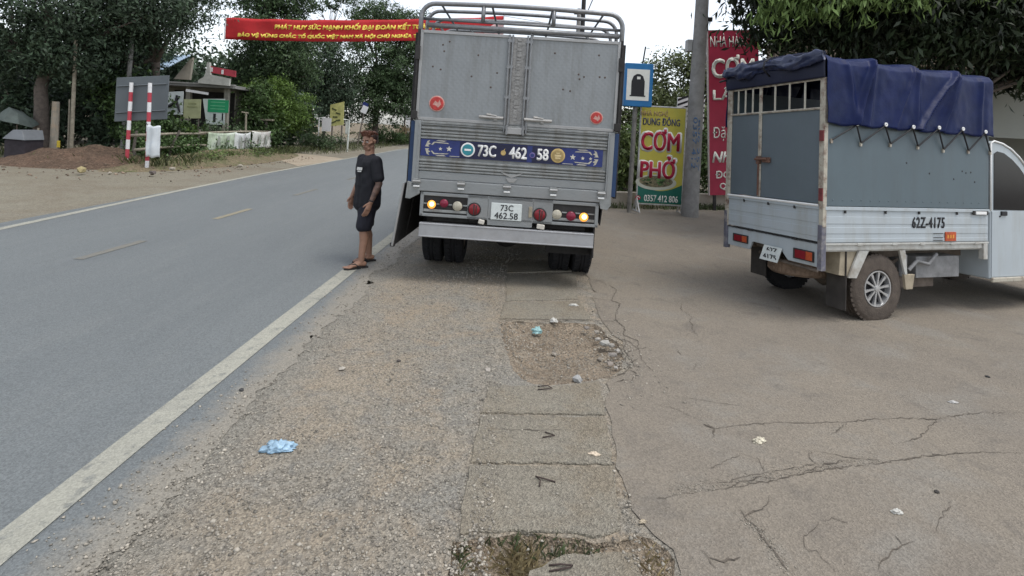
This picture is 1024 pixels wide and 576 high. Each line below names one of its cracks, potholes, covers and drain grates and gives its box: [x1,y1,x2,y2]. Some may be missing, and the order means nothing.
pothole [448,533,675,576]
pothole [499,321,625,386]
crack [657,406,1021,571]
crack [584,279,653,381]
